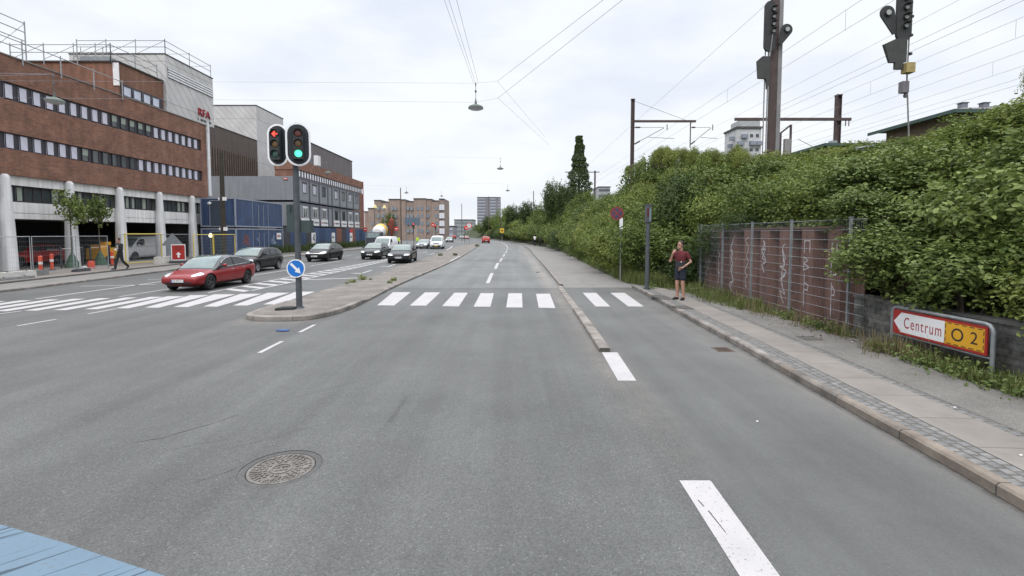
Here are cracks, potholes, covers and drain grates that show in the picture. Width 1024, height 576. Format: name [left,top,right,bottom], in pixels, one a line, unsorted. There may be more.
manhole cover [236,451,323,488]
